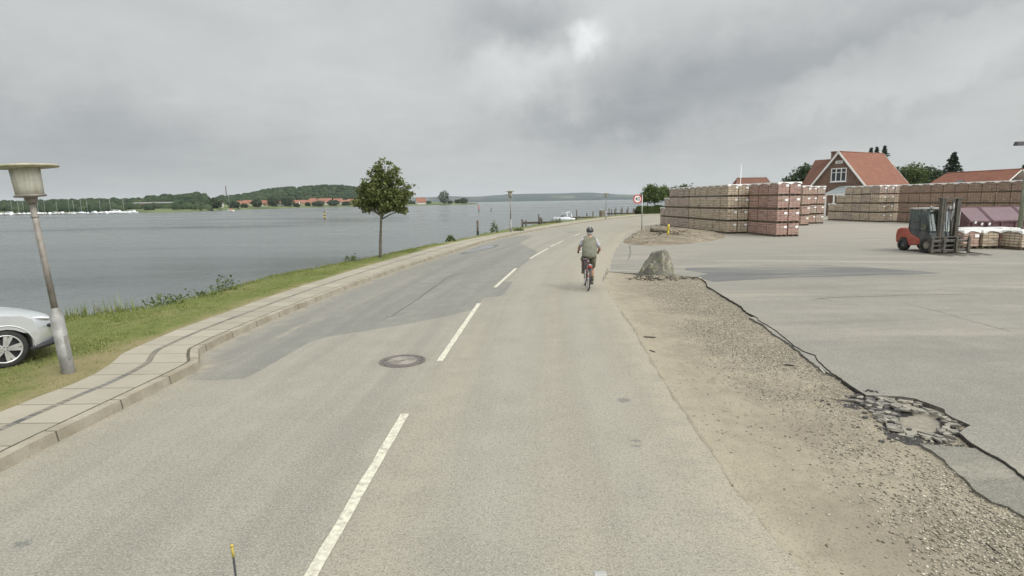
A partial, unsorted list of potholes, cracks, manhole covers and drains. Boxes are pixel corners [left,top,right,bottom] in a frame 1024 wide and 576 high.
crack [701,279,1024,480]
pothole [814,389,970,448]
manhole cover [379,354,426,368]
